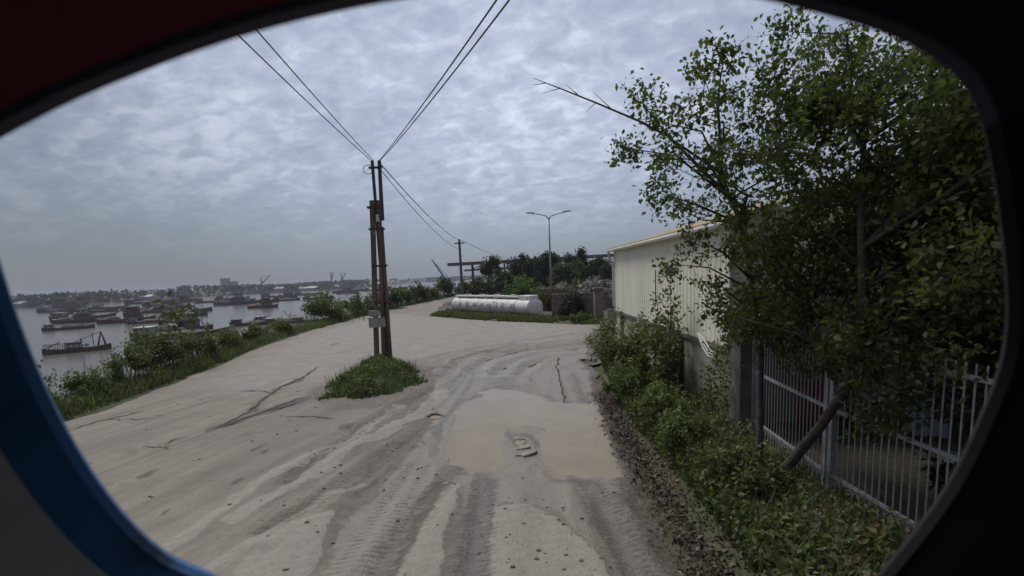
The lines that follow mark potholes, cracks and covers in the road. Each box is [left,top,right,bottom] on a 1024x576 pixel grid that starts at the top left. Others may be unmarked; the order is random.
crack [209,367,335,431]
crack [555,357,566,404]
